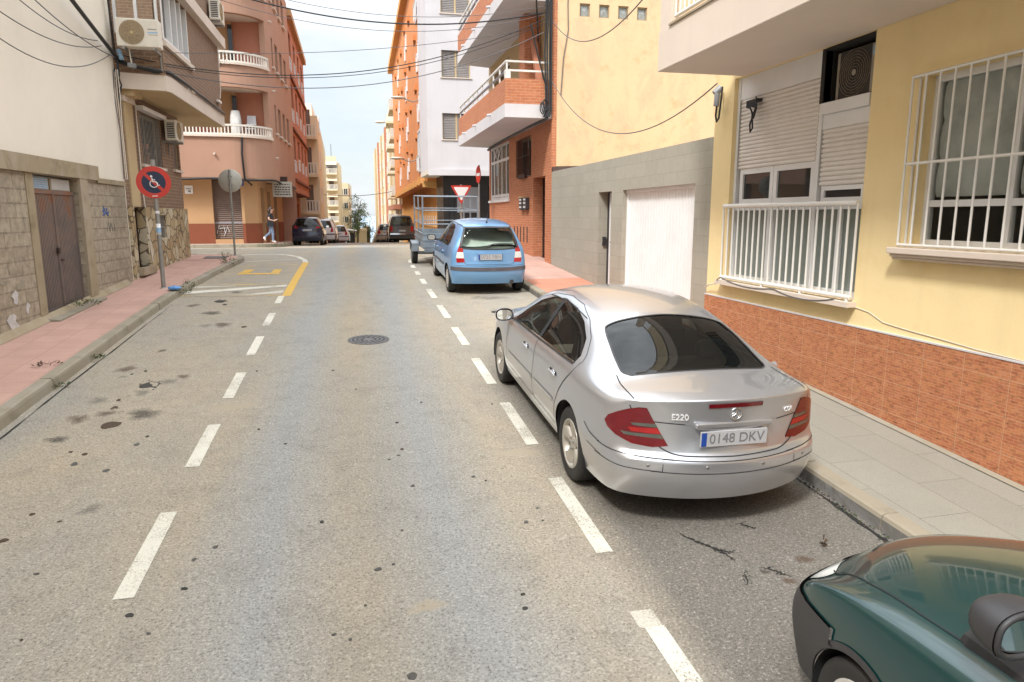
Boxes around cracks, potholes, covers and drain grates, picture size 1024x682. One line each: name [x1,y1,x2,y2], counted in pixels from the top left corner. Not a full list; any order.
crack [680,523,791,587]
manhole cover [347,335,389,345]
